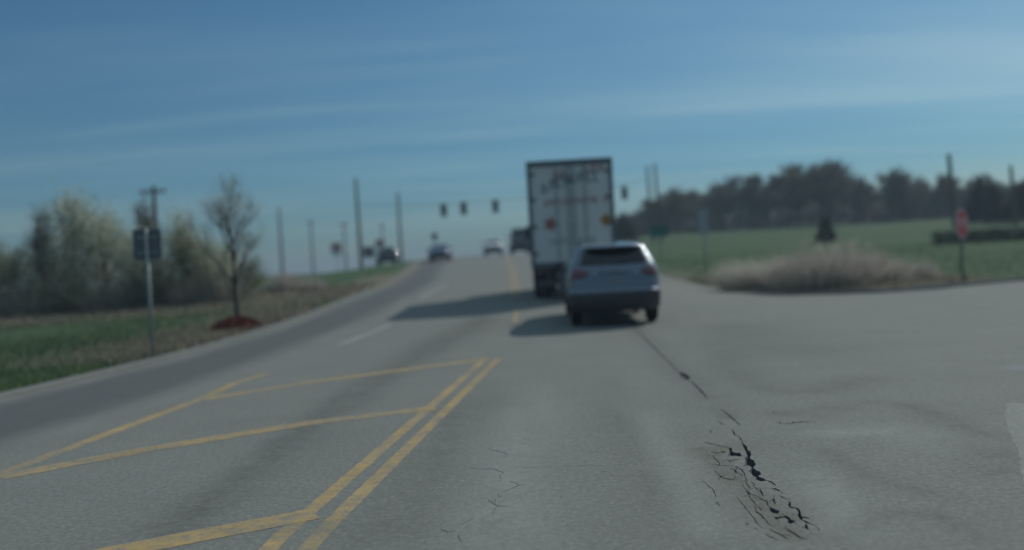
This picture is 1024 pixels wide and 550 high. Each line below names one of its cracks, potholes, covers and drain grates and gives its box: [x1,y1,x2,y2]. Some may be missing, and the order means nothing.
crack [471,448,524,514]
crack [703,409,818,540]
